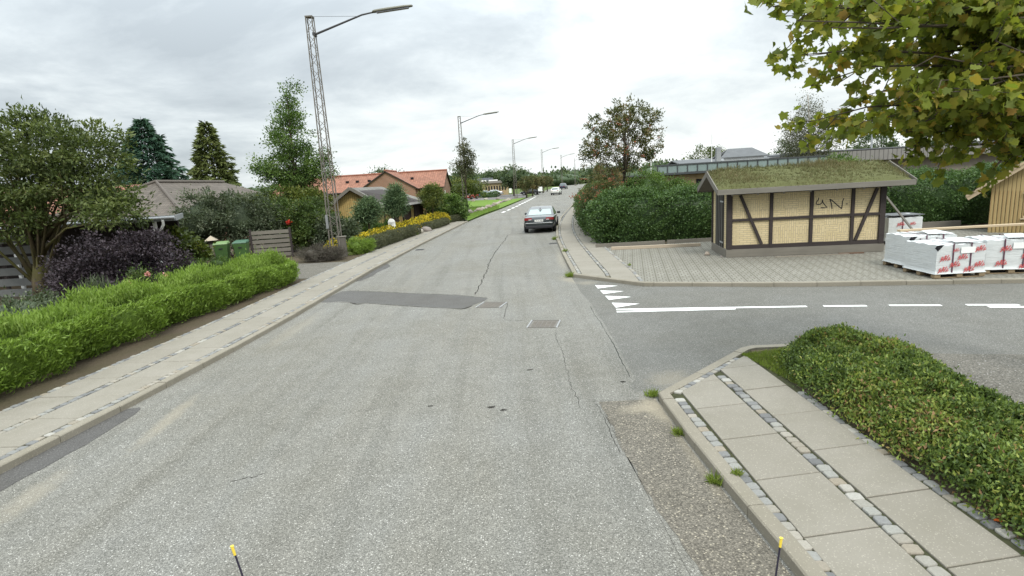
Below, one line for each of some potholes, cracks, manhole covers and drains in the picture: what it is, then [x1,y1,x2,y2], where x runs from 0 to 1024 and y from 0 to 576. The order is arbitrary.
crack [555,332,629,452]
manhole cover [526,320,561,328]
